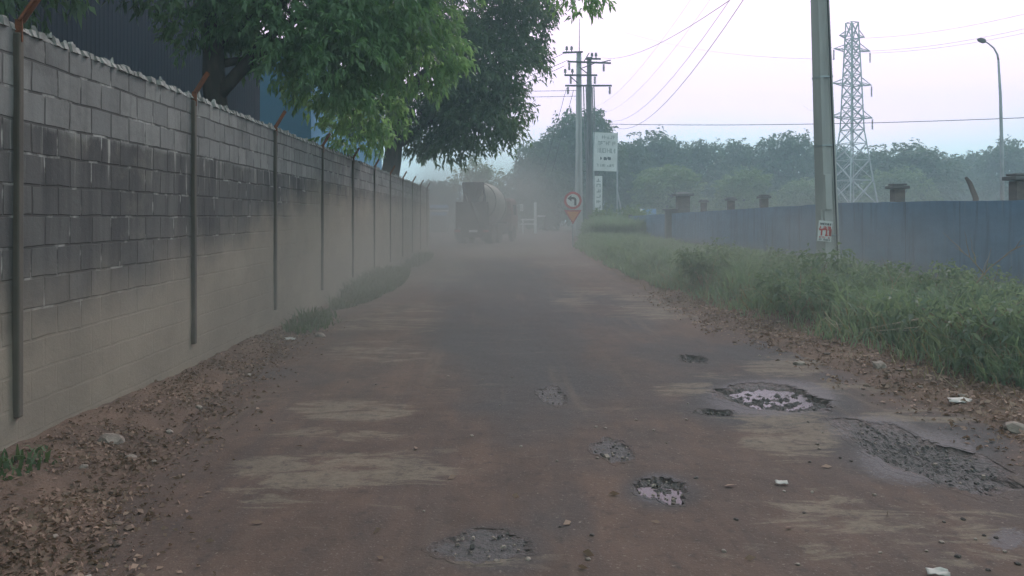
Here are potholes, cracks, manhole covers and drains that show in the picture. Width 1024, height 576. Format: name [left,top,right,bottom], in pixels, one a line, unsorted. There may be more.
pothole [700,380,843,415]
pothole [534,384,569,408]
pothole [630,475,691,507]
pothole [421,525,539,566]
pothole [587,435,638,467]
pothole [675,354,710,364]
pothole [690,408,736,417]
pothole [823,414,1024,504]
